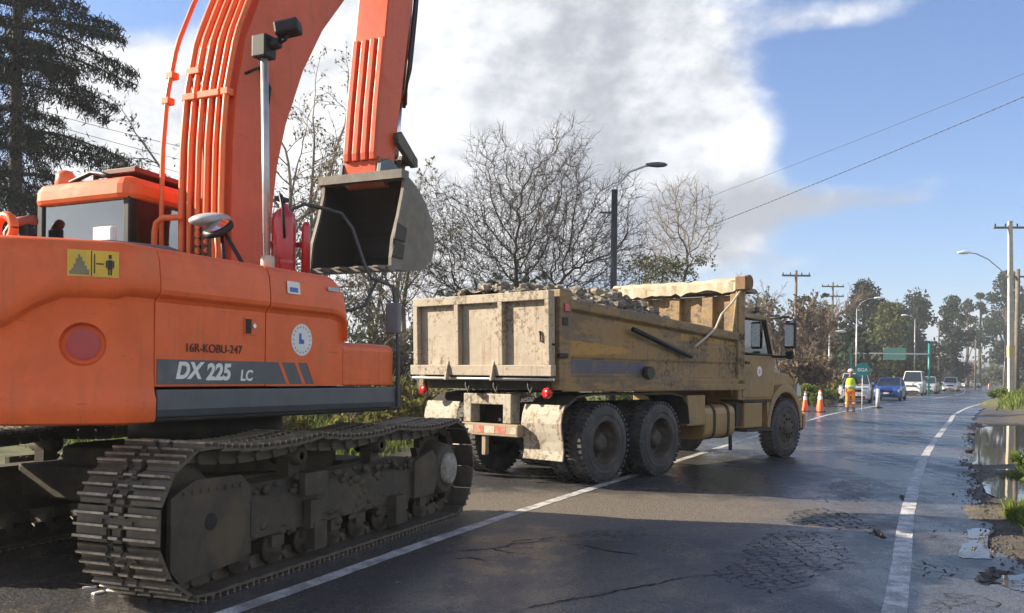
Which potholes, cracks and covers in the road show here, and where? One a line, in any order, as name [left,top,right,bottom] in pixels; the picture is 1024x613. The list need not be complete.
pothole [974,567,1016,586]
crack [442,537,555,560]
crack [506,574,728,613]
